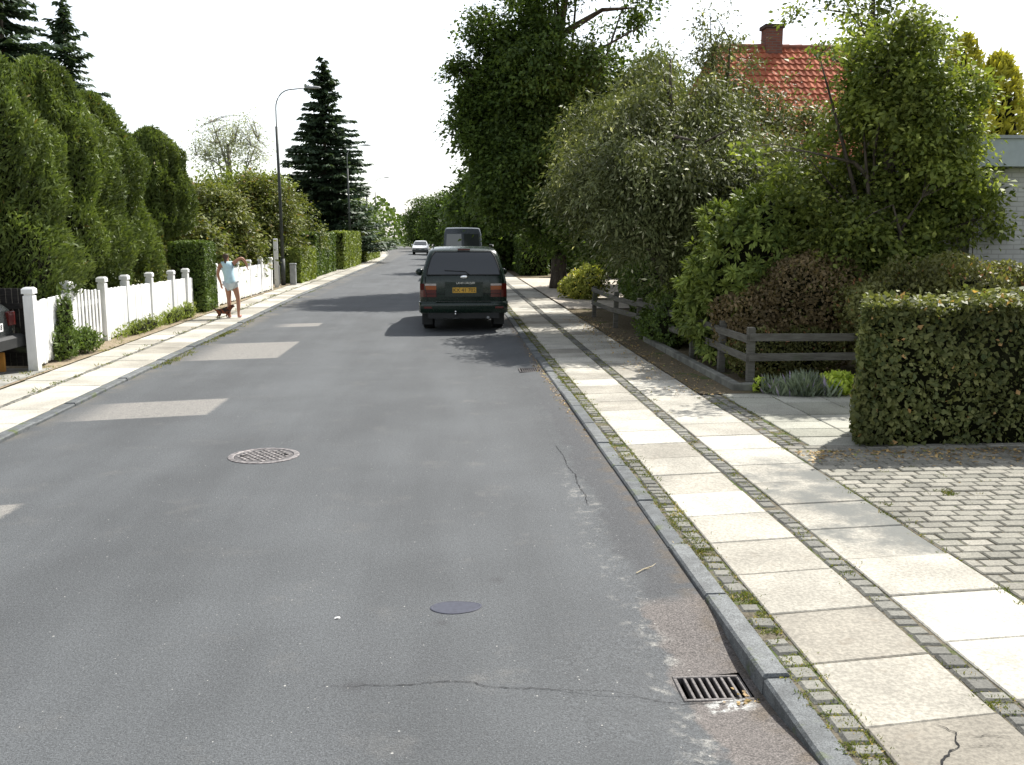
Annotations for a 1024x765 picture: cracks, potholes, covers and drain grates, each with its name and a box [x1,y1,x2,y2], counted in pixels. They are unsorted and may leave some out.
utility cover [430,601,482,614]
crack [323,681,756,705]
drain grate [672,675,753,702]
crack [940,725,1004,765]
manhole cover [228,448,300,464]
